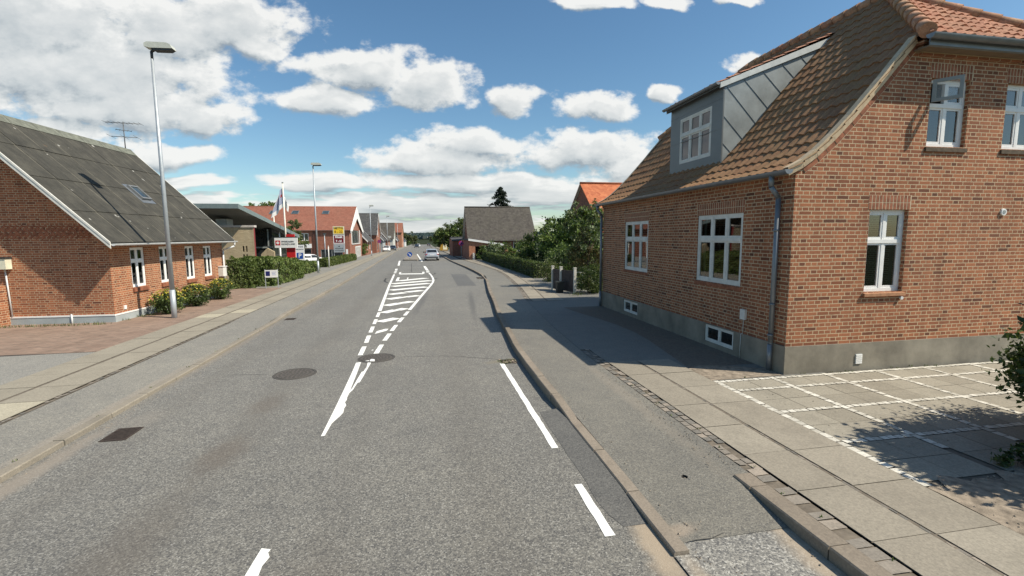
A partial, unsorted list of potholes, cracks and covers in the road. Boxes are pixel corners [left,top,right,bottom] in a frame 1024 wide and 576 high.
manhole cover [358,353,395,363]
manhole cover [272,368,317,380]
